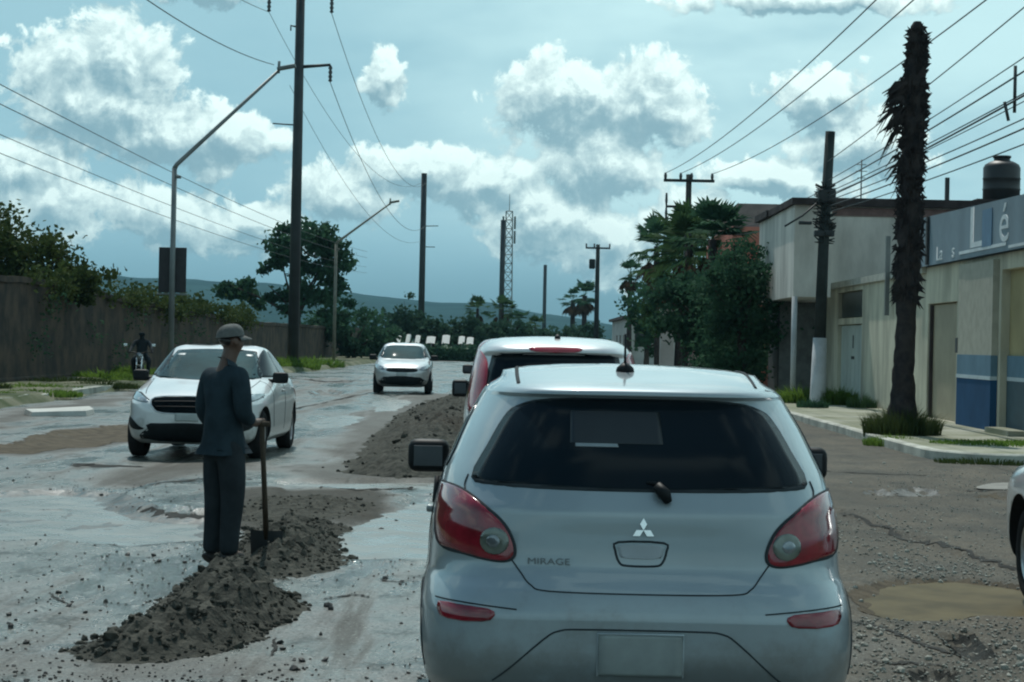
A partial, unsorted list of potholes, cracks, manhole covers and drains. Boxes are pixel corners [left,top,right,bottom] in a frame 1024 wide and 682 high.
pothole [939,633,1001,662]
pothole [0,489,204,546]
pothole [0,425,128,454]
crack [839,512,1017,571]
pothole [848,577,1021,620]
